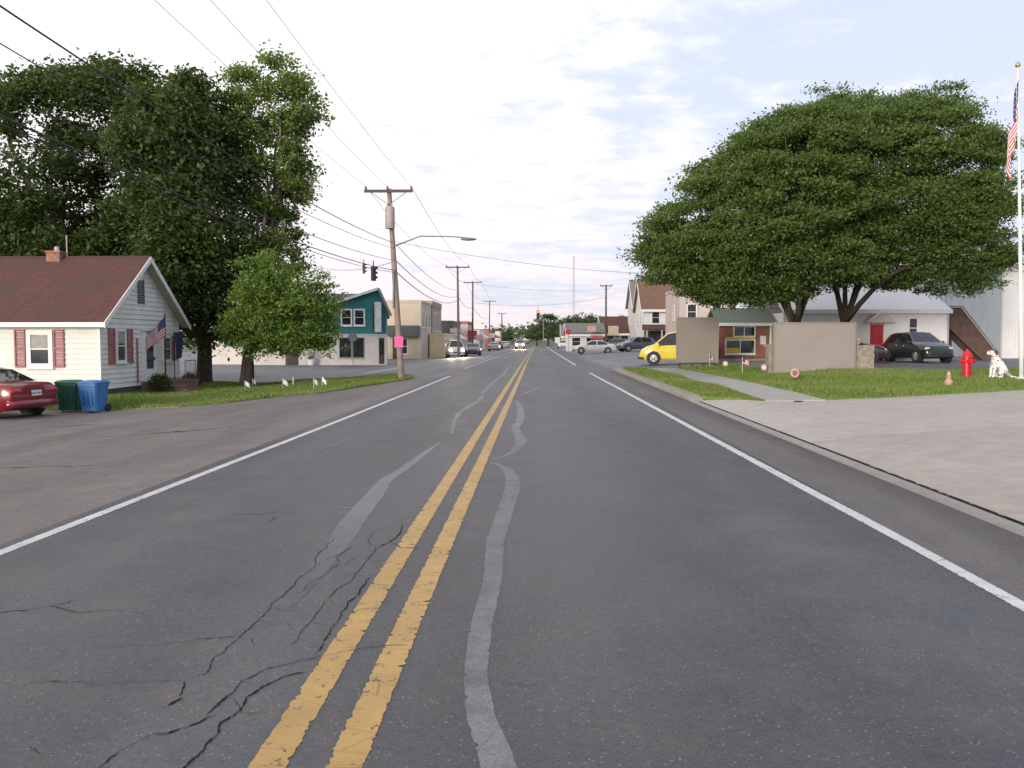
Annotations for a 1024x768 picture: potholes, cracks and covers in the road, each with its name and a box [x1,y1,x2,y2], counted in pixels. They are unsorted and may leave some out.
crack [25,525,425,768]
crack [2,600,153,616]
